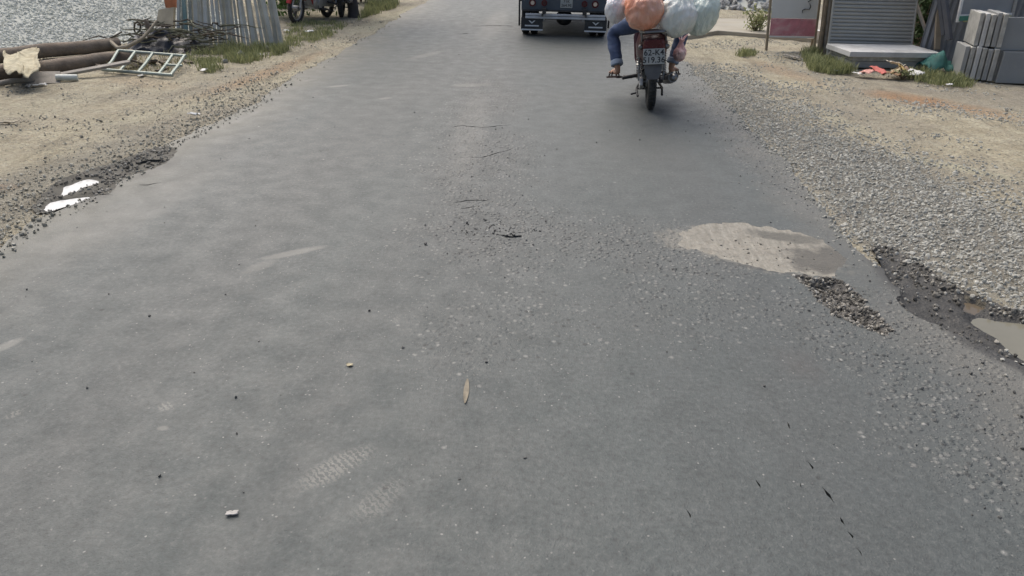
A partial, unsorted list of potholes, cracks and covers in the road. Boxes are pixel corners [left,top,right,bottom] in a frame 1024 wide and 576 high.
pothole [792,274,896,336]
crack [454,125,522,238]
pothole [32,146,177,214]
pothole [871,245,1024,364]
